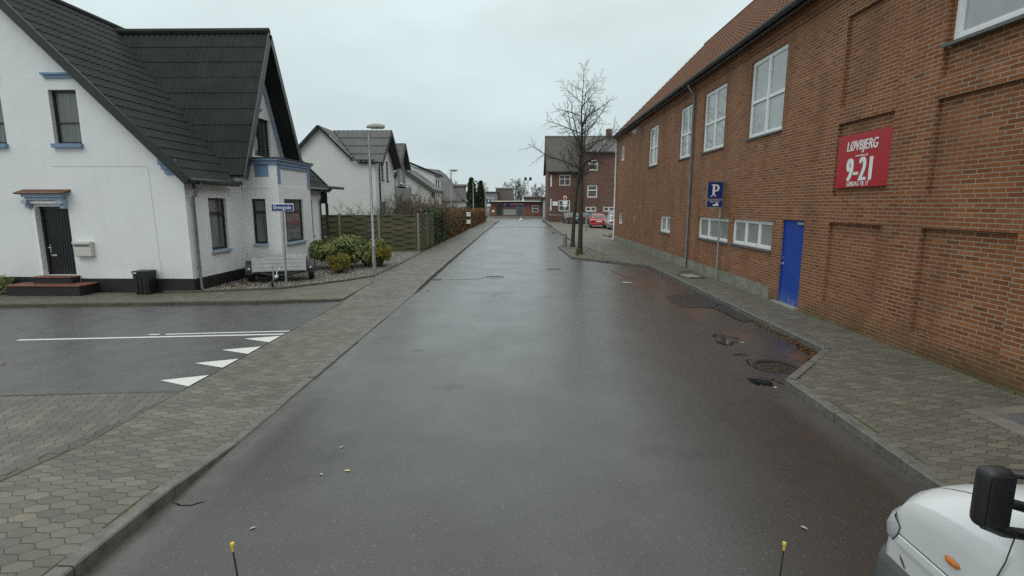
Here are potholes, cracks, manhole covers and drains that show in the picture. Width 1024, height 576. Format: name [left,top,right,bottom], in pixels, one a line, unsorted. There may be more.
pothole [713,333,741,346]
manhole cover [752,359,800,373]
